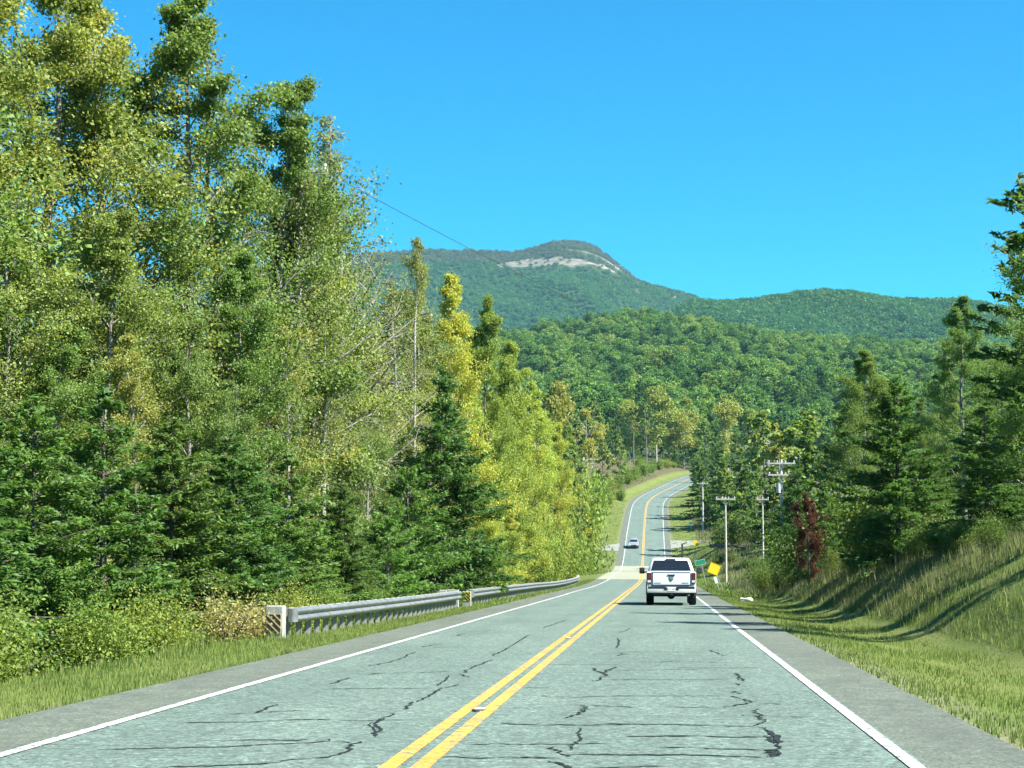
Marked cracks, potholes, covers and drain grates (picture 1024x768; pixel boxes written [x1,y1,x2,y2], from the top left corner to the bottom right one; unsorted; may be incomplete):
crack [124,621,563,767]
crack [492,628,796,768]
